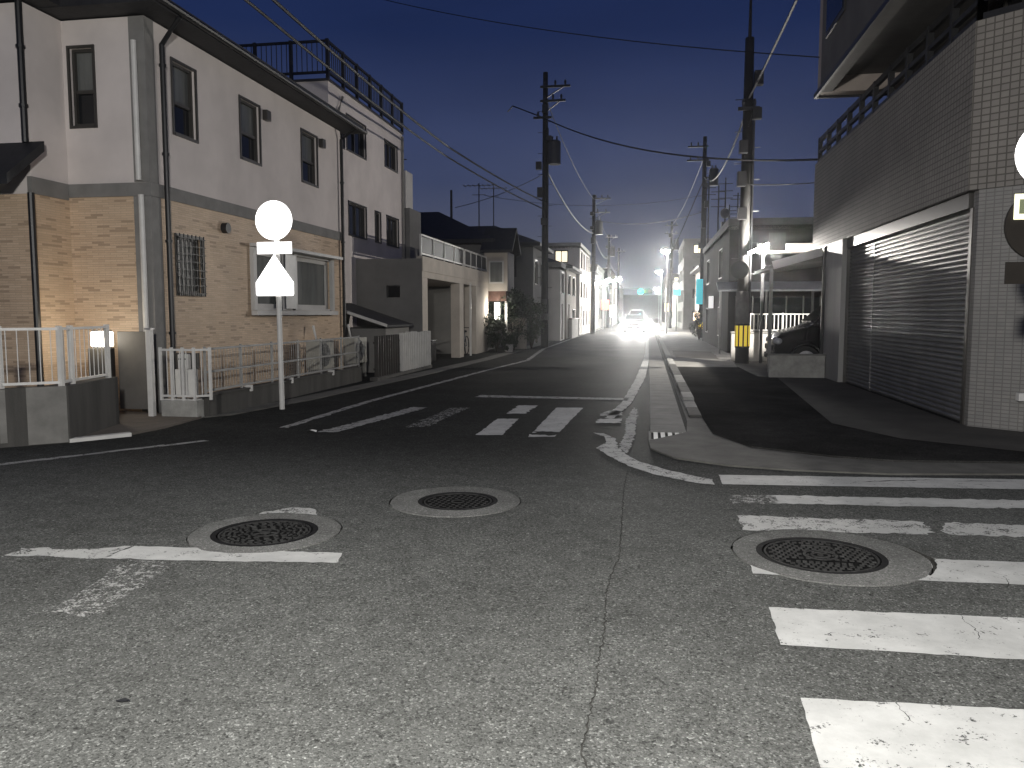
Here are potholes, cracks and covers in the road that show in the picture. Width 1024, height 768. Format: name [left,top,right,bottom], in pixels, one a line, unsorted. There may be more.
manhole cover [731,530,932,587]
crack [580,471,629,768]
manhole cover [186,513,342,554]
manhole cover [389,486,521,517]
